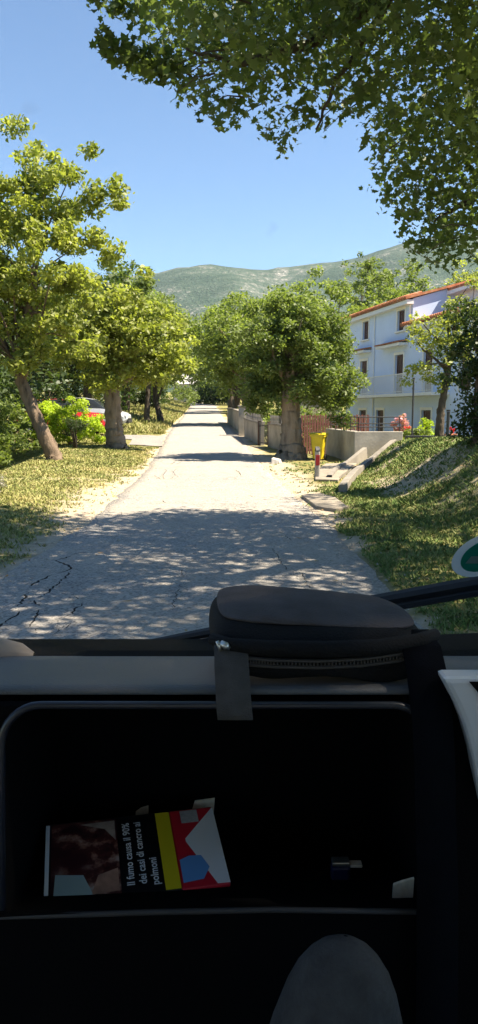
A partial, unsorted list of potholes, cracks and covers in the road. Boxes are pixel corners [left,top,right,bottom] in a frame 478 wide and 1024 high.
crack [0,552,91,635]
crack [269,534,316,590]
crack [145,461,181,503]
crack [167,569,188,612]
